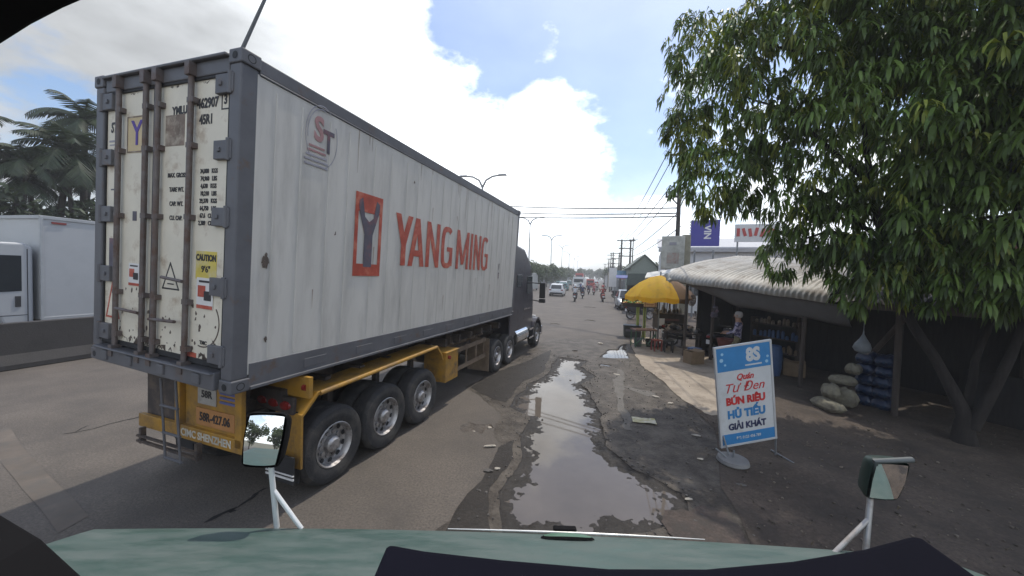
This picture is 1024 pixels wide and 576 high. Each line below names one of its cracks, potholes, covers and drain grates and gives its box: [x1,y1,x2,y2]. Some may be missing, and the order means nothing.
pothole [498,357,689,534]
crack [204,488,267,523]
